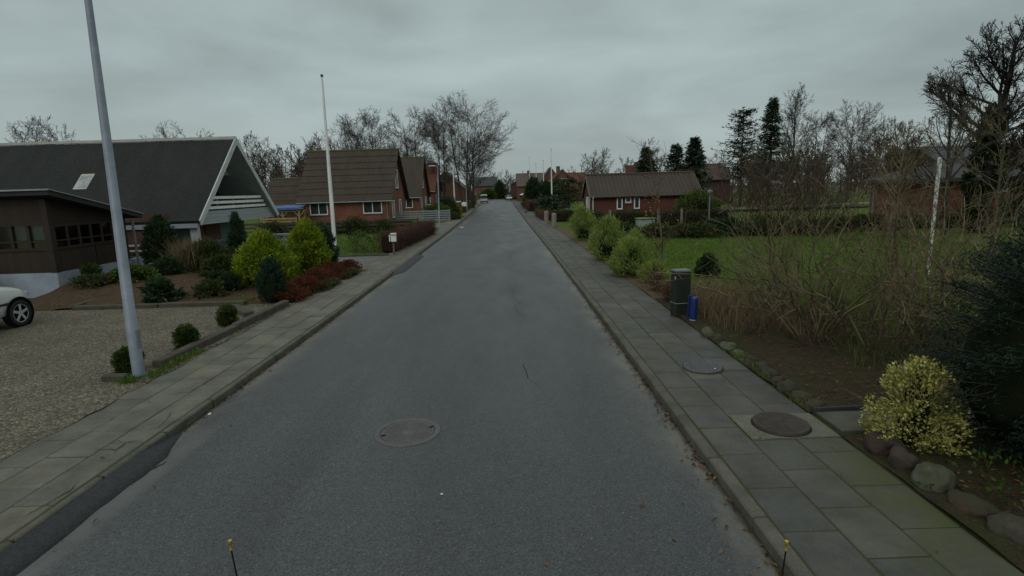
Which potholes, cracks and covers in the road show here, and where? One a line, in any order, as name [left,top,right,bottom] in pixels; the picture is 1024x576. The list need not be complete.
manhole cover [374,418,441,447]
manhole cover [682,361,724,374]
manhole cover [751,412,812,437]
